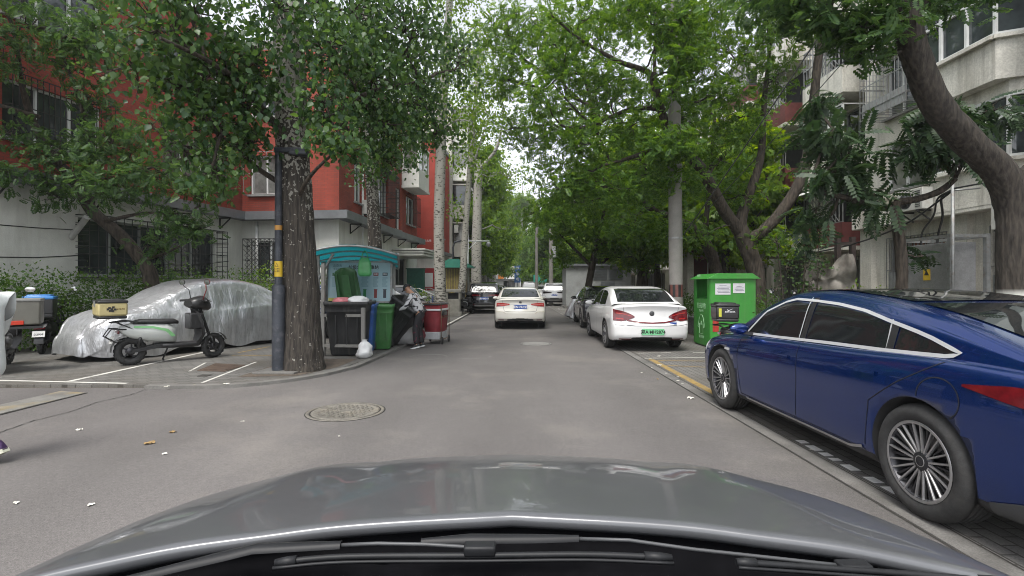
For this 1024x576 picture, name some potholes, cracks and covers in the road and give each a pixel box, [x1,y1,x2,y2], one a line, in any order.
manhole cover [304,402,385,422]
manhole cover [197,363,245,372]
